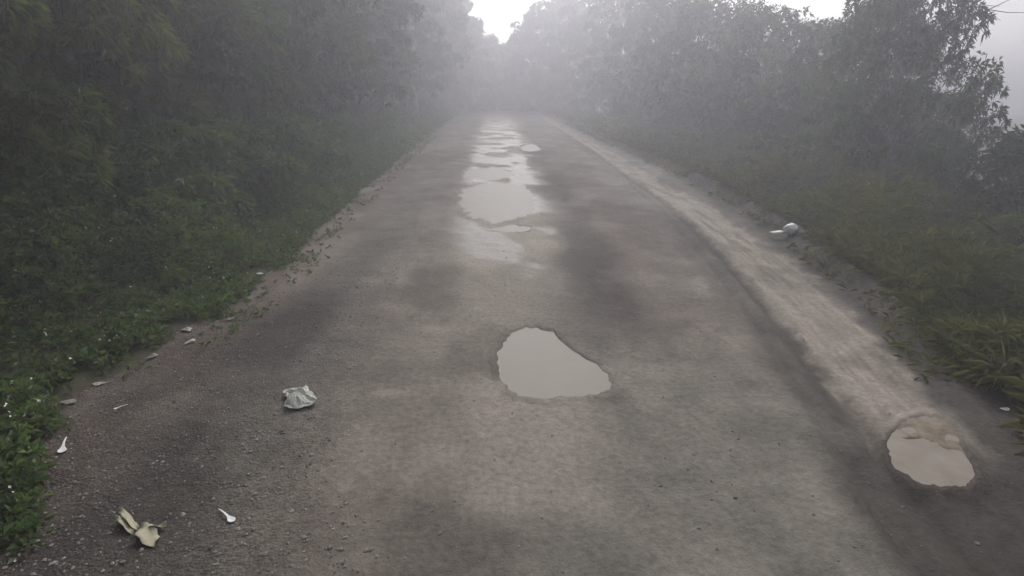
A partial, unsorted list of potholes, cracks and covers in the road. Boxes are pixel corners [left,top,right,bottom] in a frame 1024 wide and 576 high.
pothole [453,181,541,229]
pothole [519,143,543,152]
pothole [879,410,983,495]
pothole [459,166,519,181]
pothole [489,322,623,406]
pothole [483,223,535,233]
